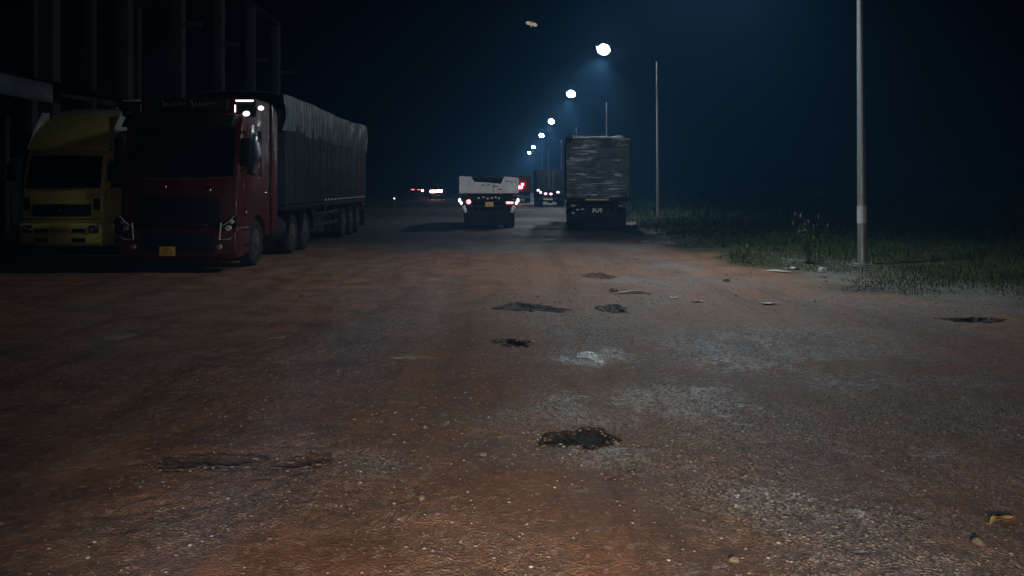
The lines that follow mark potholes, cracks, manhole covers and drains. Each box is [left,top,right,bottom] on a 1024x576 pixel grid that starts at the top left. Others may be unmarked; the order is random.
pothole [538,426,622,450]
pothole [491,338,531,347]
pothole [595,304,628,313]
pothole [492,302,572,313]
pothole [155,453,270,472]
pothole [269,452,331,471]
